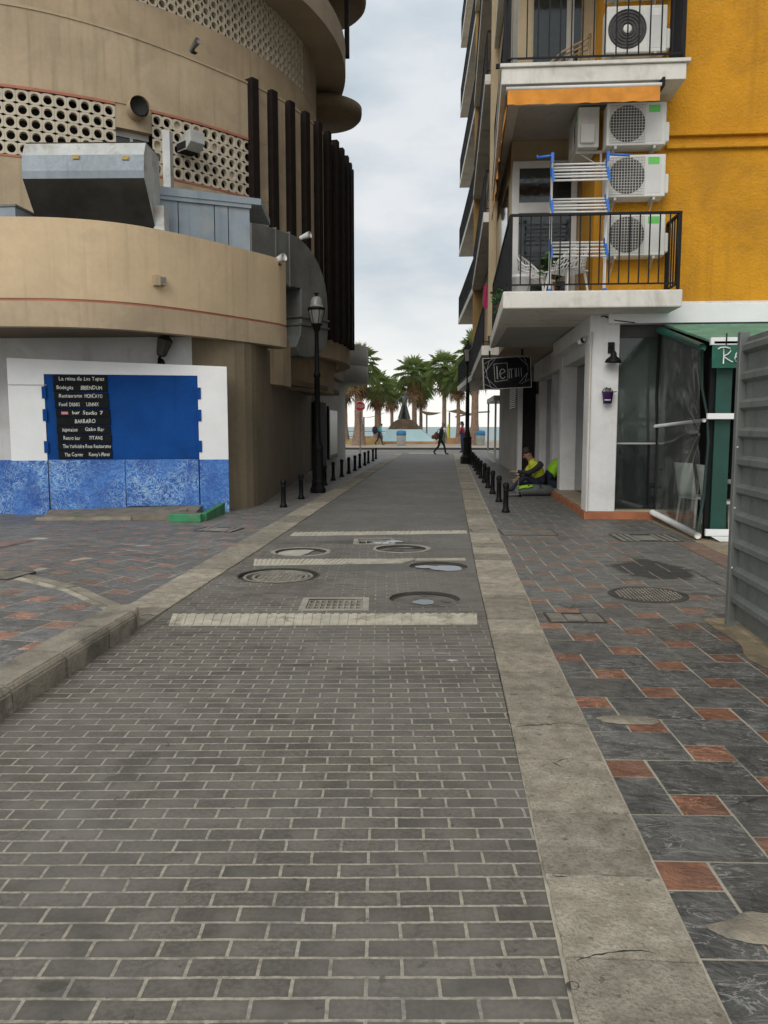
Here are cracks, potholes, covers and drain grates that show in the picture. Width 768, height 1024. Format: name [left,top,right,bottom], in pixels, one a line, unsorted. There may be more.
drain grate [298,597,369,611]
manhole cover [608,587,690,603]
manhole cover [373,544,431,553]
manhole cover [236,568,320,583]
crack [576,950,656,961]
